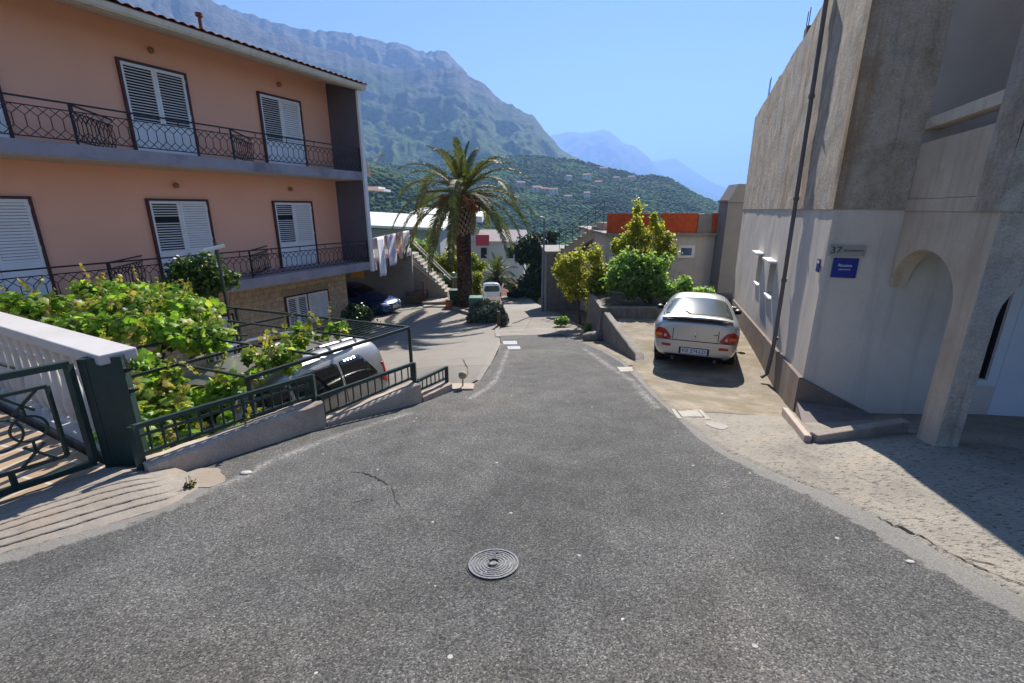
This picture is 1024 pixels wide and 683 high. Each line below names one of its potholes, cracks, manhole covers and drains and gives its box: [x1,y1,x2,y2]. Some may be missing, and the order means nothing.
crack [877,516,1023,584]
manhole cover [671,409,710,419]
manhole cover [466,549,521,582]
